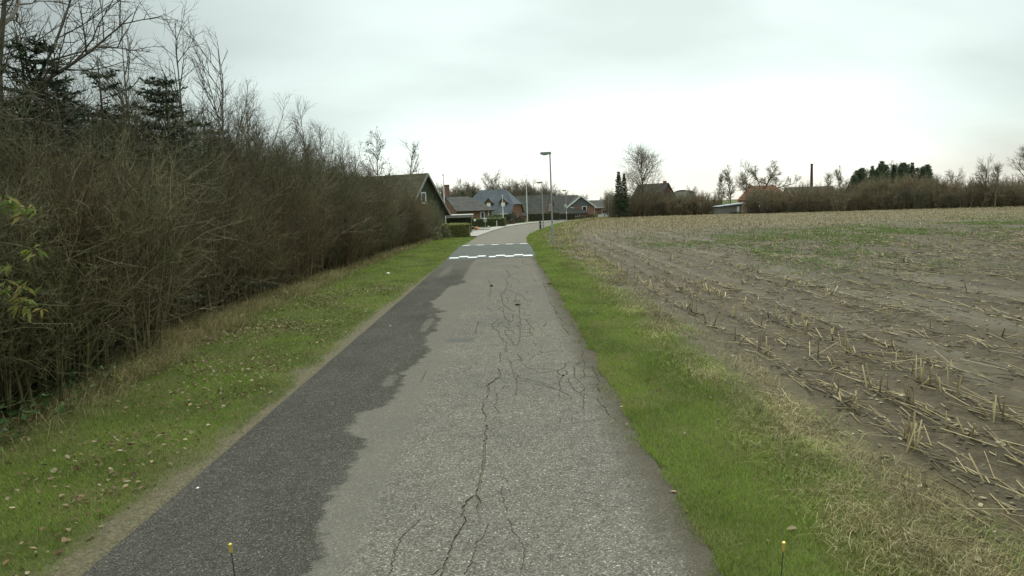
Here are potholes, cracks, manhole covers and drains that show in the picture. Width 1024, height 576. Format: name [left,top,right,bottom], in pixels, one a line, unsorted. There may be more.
crack [389,506,421,575]
crack [431,263,609,576]
